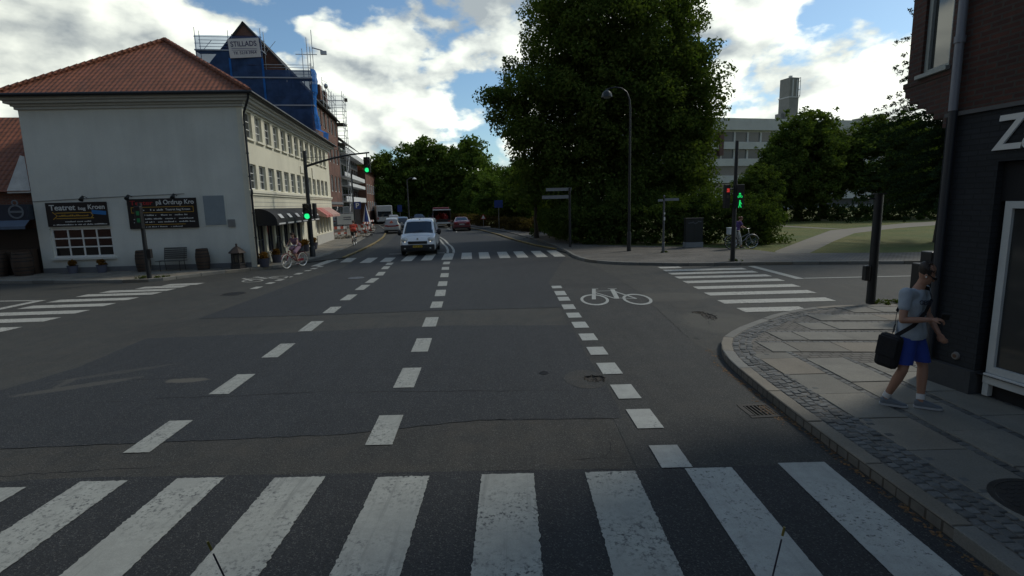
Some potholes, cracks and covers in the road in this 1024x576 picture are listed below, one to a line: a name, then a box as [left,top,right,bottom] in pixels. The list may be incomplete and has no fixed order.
drain grate [737,403,784,418]
pothole [582,374,605,383]
manhole cover [986,478,1024,516]
